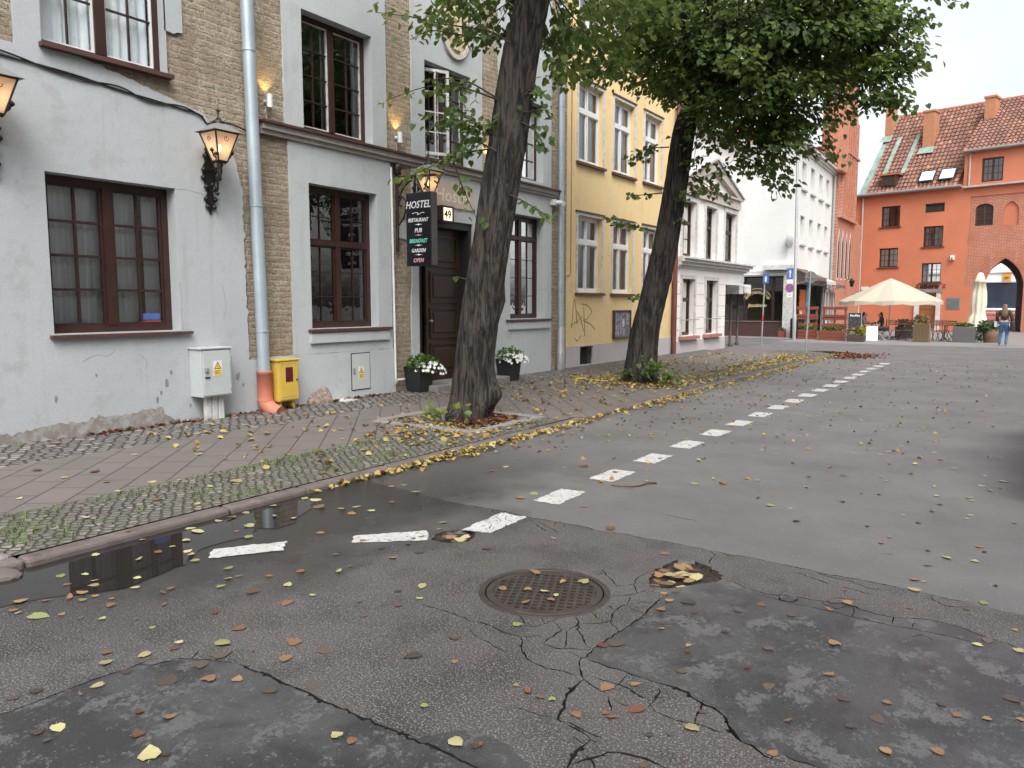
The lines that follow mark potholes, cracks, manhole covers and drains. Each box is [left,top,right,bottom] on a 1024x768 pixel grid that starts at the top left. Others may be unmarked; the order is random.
crack [447,501,975,607]
manhole cover [478,568,611,623]
pothole [649,559,724,589]
crack [734,582,1017,648]
crack [429,568,819,768]
pothole [432,529,476,543]
